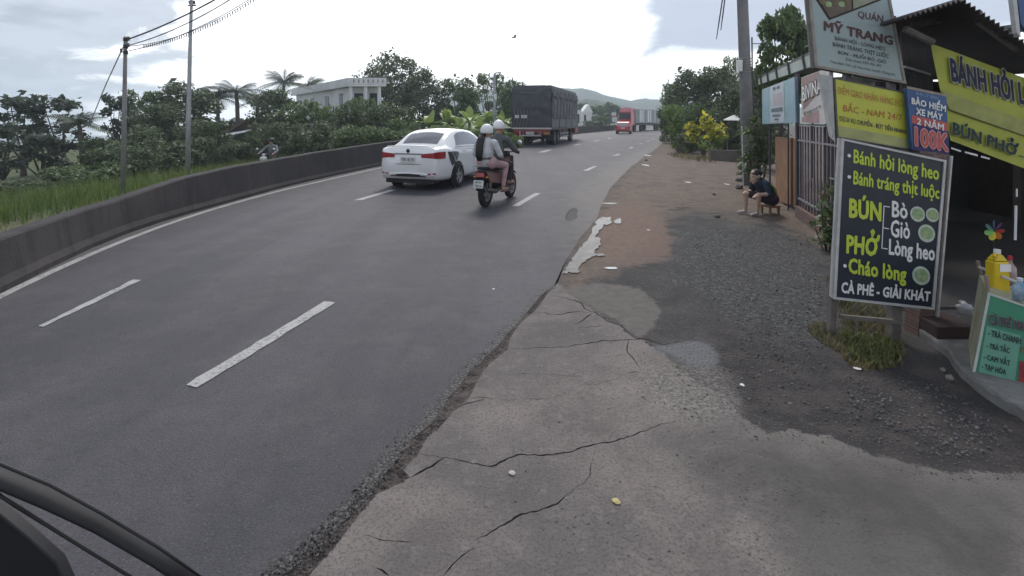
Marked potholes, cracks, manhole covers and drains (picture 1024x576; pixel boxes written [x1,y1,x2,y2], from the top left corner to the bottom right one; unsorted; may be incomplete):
crack [519,296,713,373]
crack [412,424,660,575]
